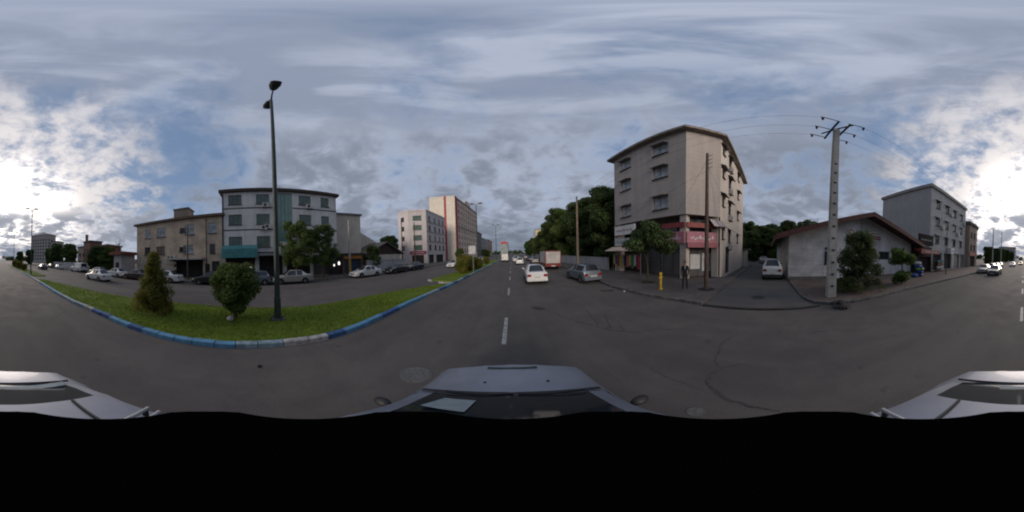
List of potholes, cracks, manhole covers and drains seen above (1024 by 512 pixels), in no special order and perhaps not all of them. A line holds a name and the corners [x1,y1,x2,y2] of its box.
crack [629,336,779,411]
manhole cover [400,367,432,383]
manhole cover [686,407,705,416]
crack [541,309,682,333]
